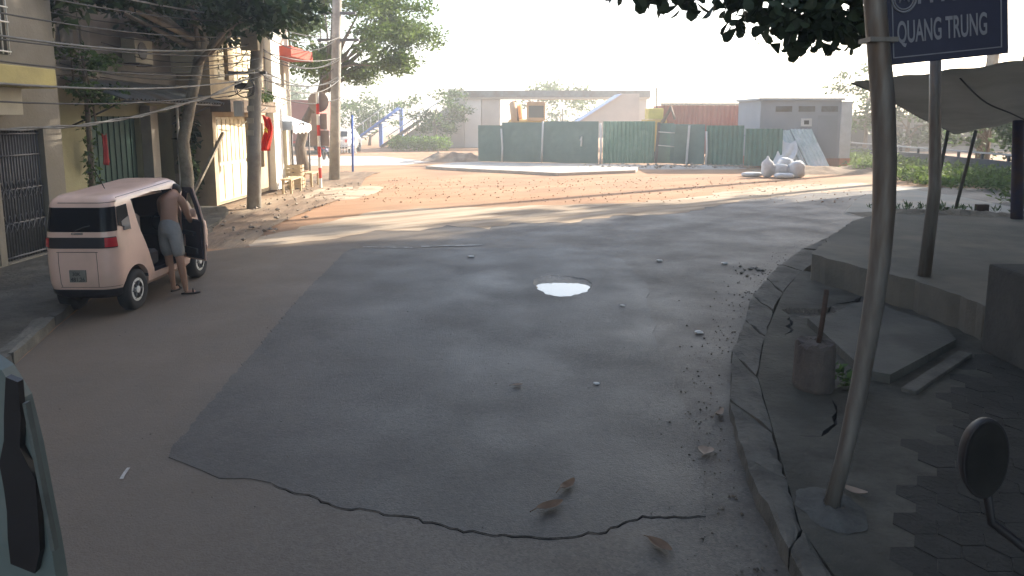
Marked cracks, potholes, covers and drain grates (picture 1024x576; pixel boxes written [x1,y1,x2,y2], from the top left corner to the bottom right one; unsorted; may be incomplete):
crack [800,398,837,436]
pothole [533,275,592,297]
crack [785,317,793,336]
crack [274,486,702,540]
